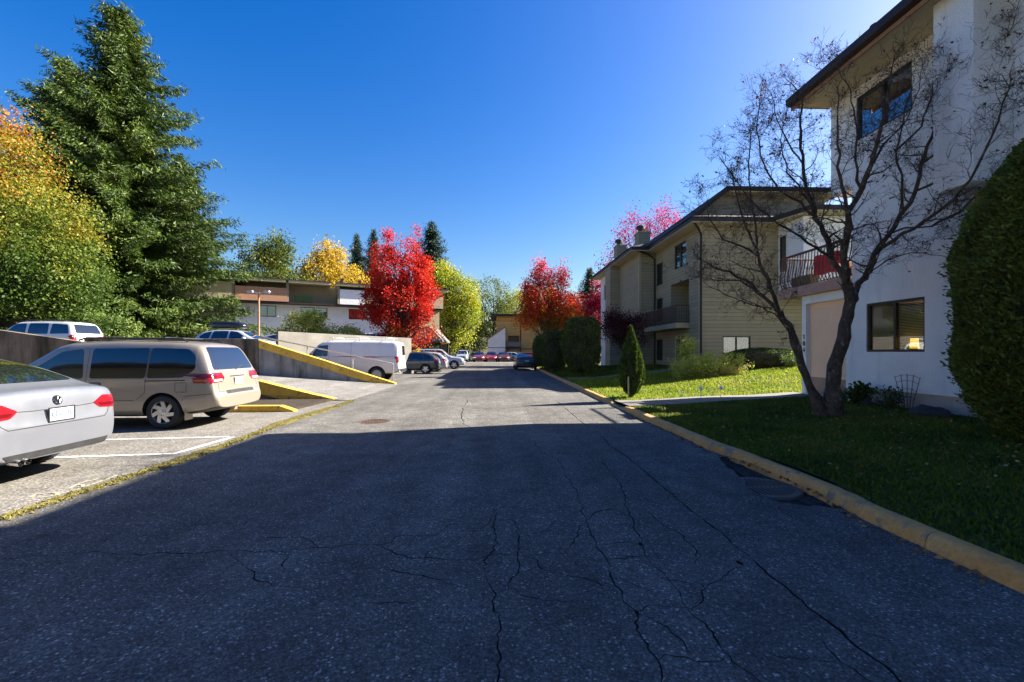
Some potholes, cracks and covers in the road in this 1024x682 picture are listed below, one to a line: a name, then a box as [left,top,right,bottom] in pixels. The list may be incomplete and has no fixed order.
drain grate [739,477,804,501]
crack [0,443,760,682]
crack [777,629,869,682]
